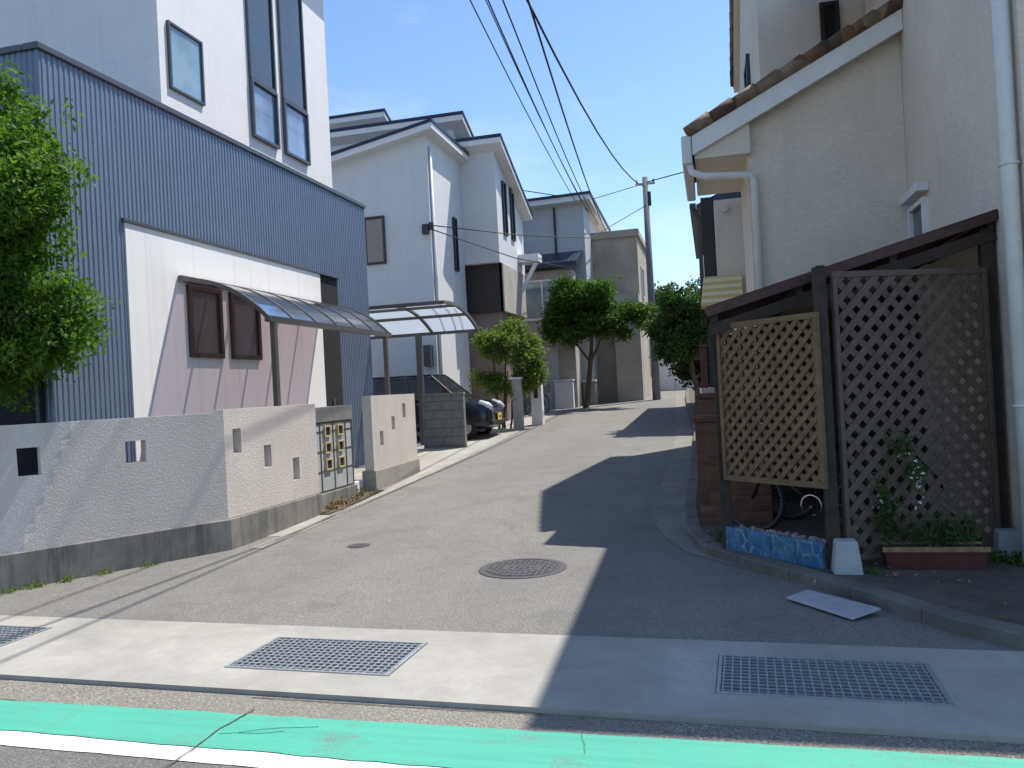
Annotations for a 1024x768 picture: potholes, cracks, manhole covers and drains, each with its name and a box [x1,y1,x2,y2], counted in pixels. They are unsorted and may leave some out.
drain grate [716,654,954,706]
manhole cover [478,558,567,579]
drain grate [0,625,52,647]
drain grate [224,636,427,676]
